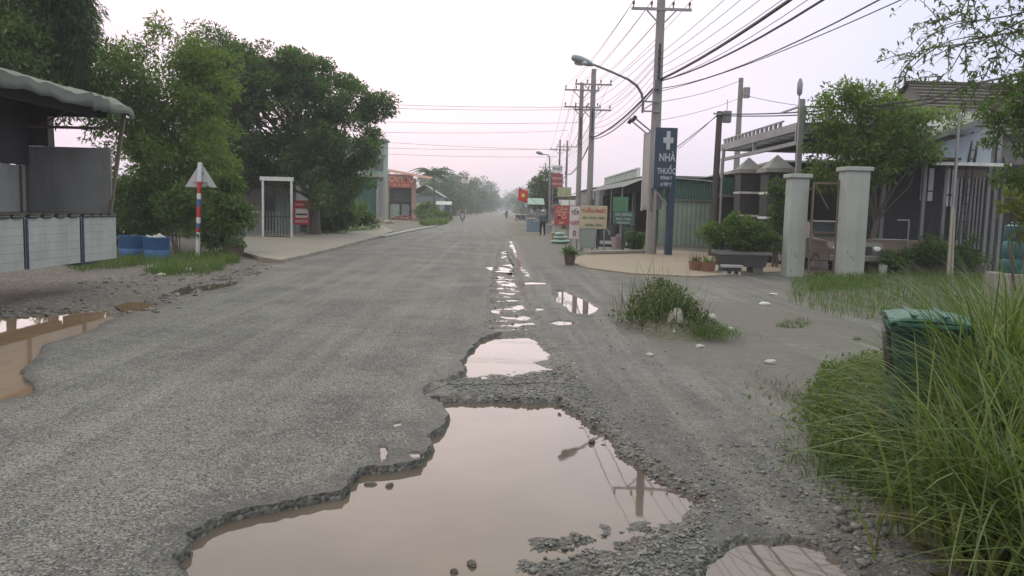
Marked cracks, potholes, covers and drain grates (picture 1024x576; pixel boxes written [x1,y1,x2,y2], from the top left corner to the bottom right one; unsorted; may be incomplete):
pothole [422,331,578,395]
pothole [0,312,114,401]
pothole [682,533,860,576]
pothole [172,394,719,576]
pothole [507,240,536,280]
pothole [551,289,601,315]
pothole [478,248,547,330]
